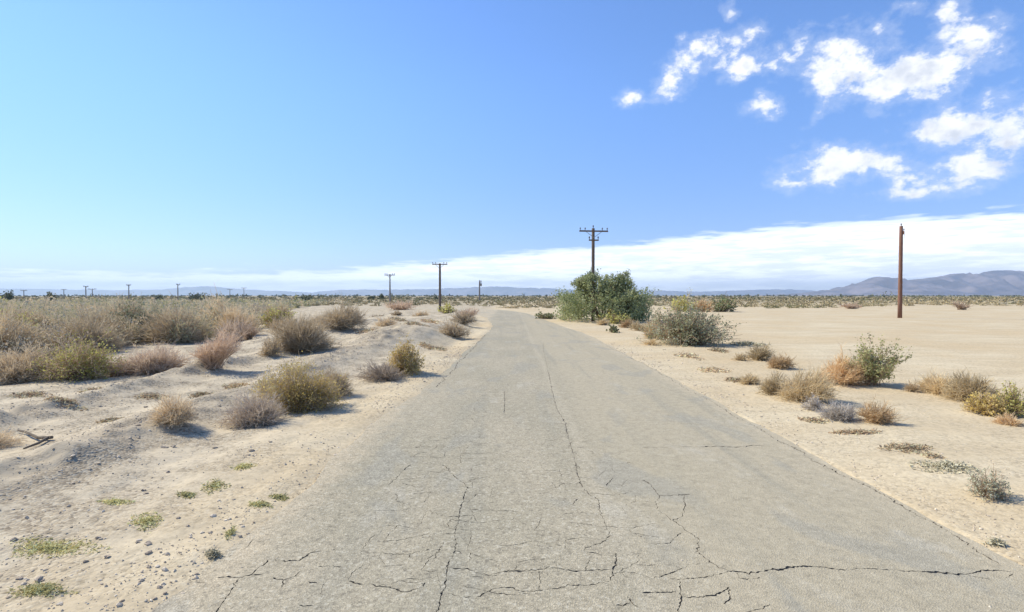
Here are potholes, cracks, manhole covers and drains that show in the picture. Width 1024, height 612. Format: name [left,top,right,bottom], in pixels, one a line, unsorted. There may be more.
crack [198,343,1013,612]
